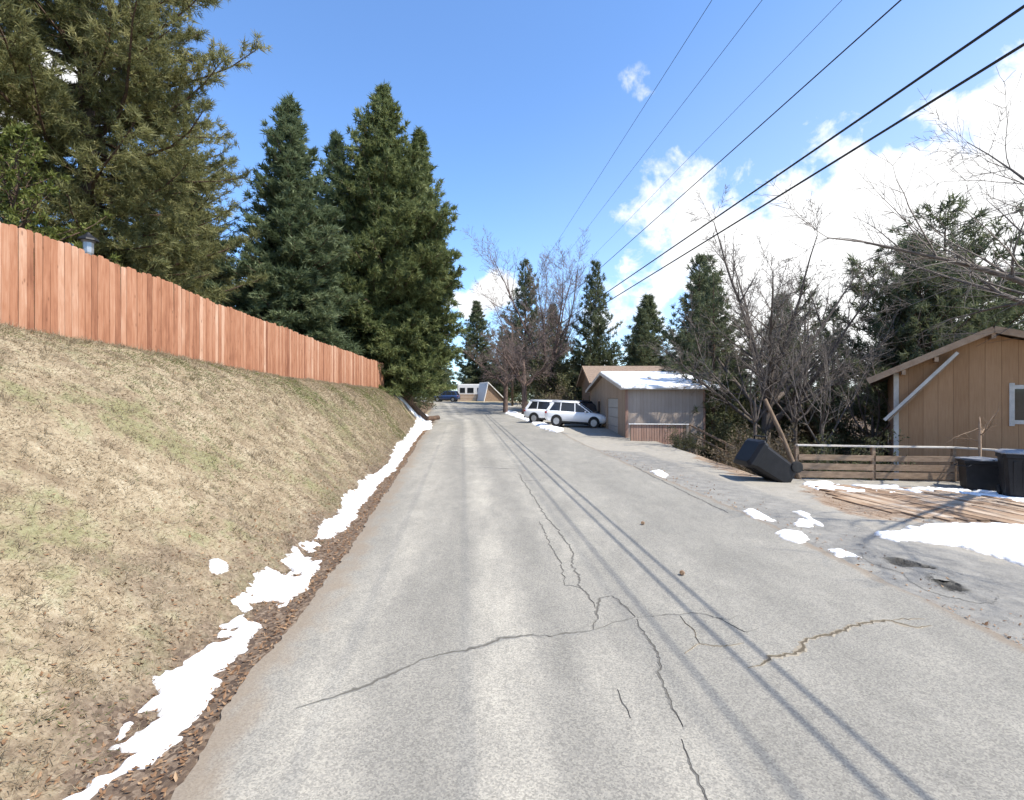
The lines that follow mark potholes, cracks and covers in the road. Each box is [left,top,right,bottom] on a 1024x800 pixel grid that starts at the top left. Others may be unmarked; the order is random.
pothole [862,550,965,581]
crack [296,467,932,800]
